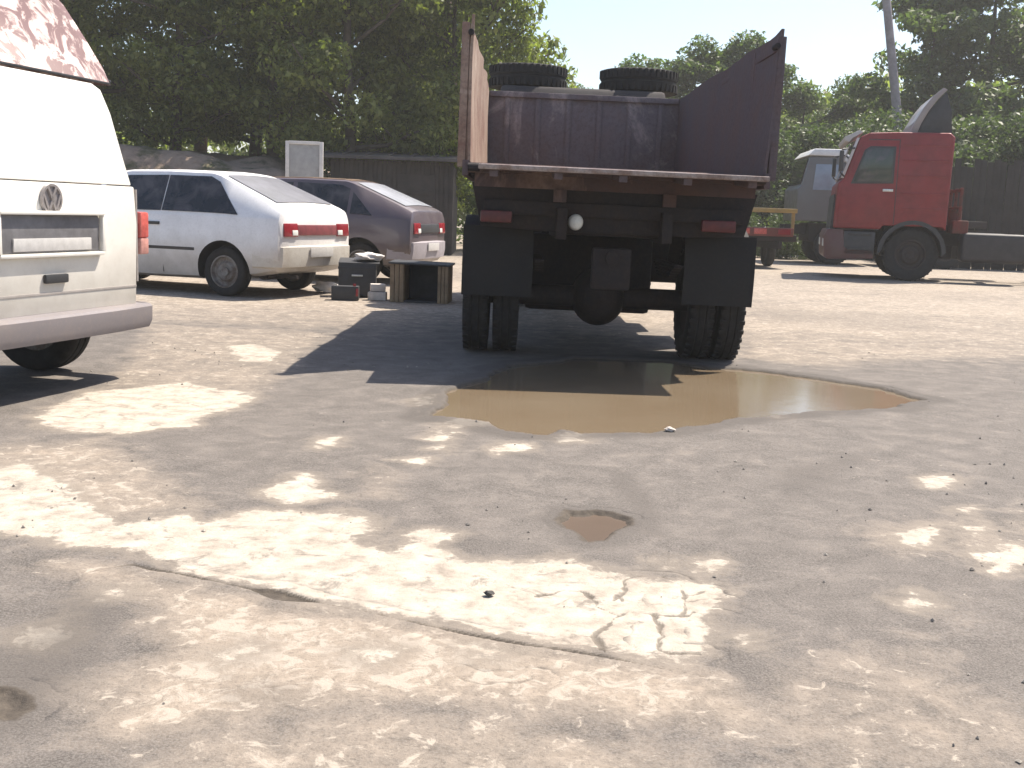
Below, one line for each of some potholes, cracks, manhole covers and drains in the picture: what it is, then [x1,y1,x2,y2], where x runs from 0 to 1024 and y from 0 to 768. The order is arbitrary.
pothole [412,356,938,438]
pothole [541,506,647,548]
crack [425,570,746,697]
